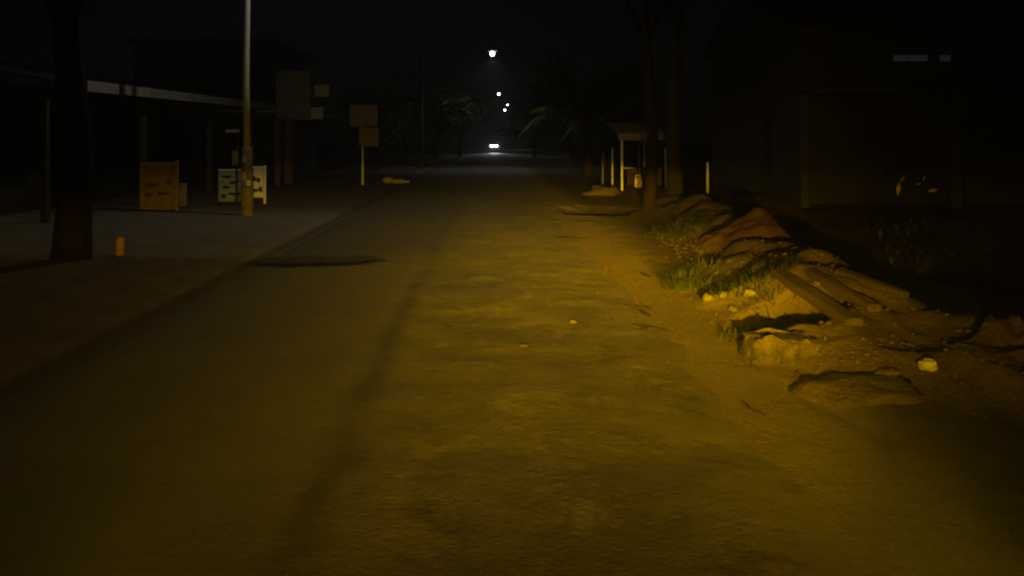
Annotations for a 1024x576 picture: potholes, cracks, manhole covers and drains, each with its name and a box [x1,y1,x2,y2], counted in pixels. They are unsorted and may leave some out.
crack [740,401,767,417]
crack [622,304,670,332]
